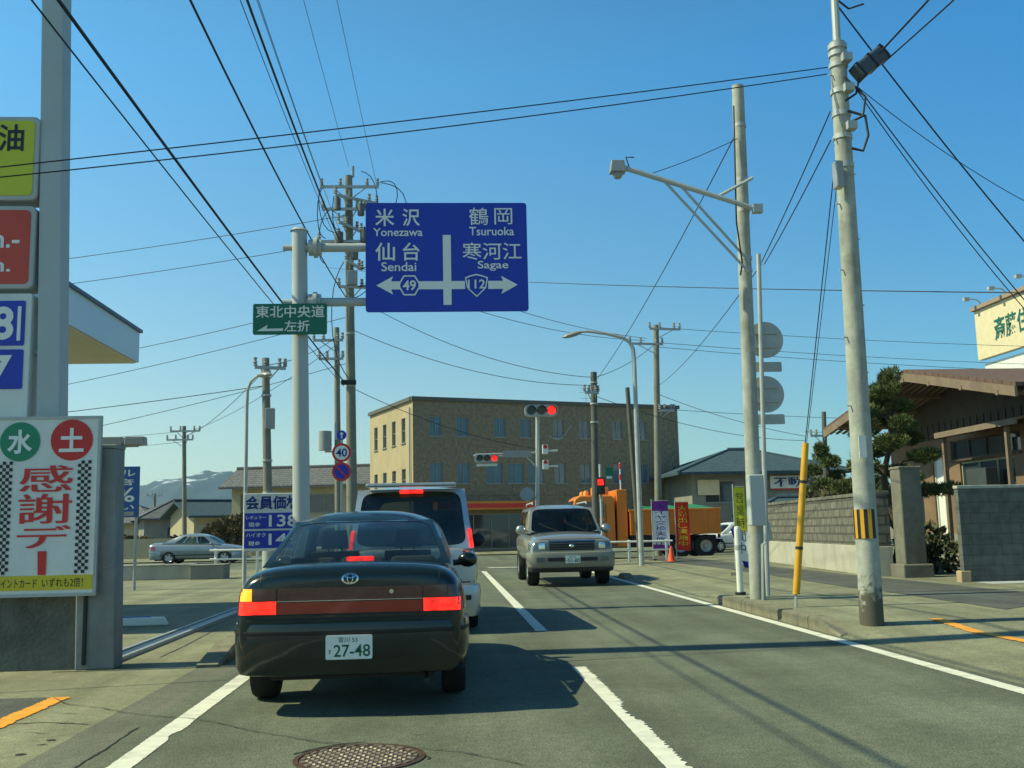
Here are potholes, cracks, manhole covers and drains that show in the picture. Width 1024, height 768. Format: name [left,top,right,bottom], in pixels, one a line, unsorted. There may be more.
manhole cover [292,743,425,768]
